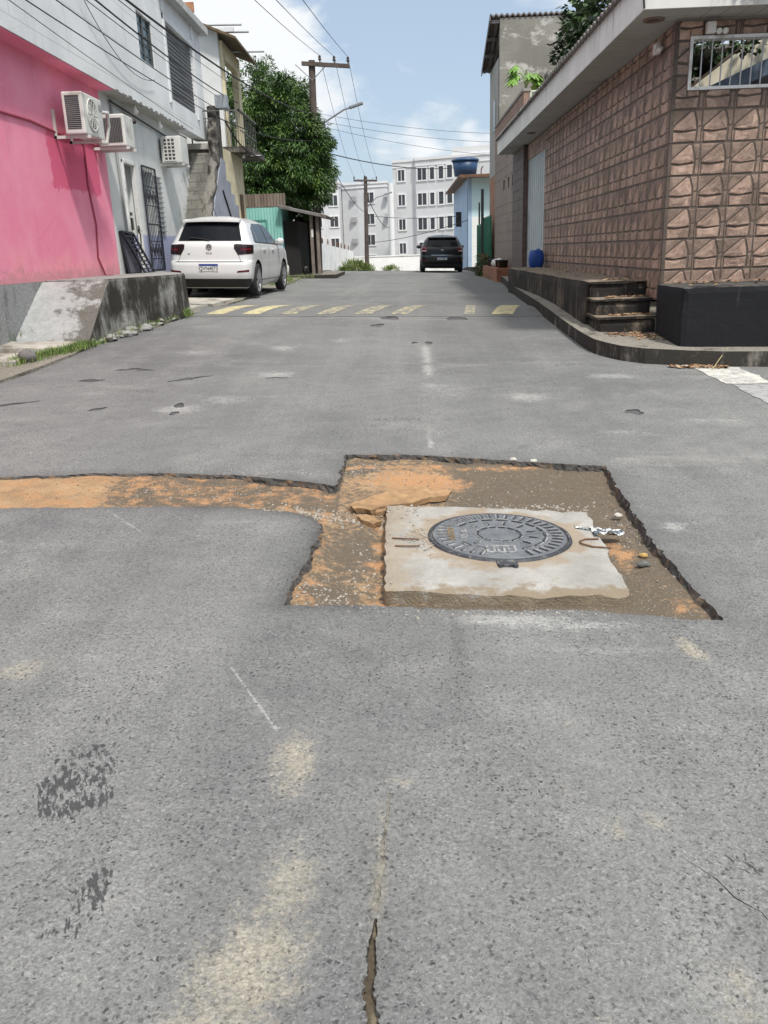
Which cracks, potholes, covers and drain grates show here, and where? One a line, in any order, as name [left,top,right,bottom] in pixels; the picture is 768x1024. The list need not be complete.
crack [361,788,392,1024]
manhole cover [428,513,573,568]
crack [685,859,768,920]
pothole [0,454,723,620]
